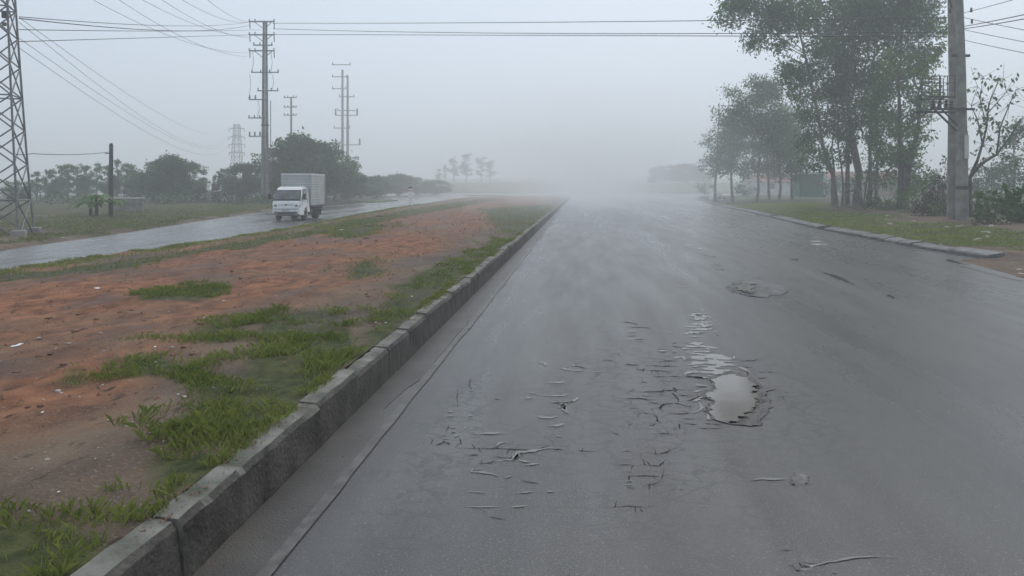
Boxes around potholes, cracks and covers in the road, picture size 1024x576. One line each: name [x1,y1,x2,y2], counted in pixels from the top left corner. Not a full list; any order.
pothole [698,372,776,426]
crack [431,309,787,519]
pothole [790,473,811,485]
crack [783,550,887,573]
